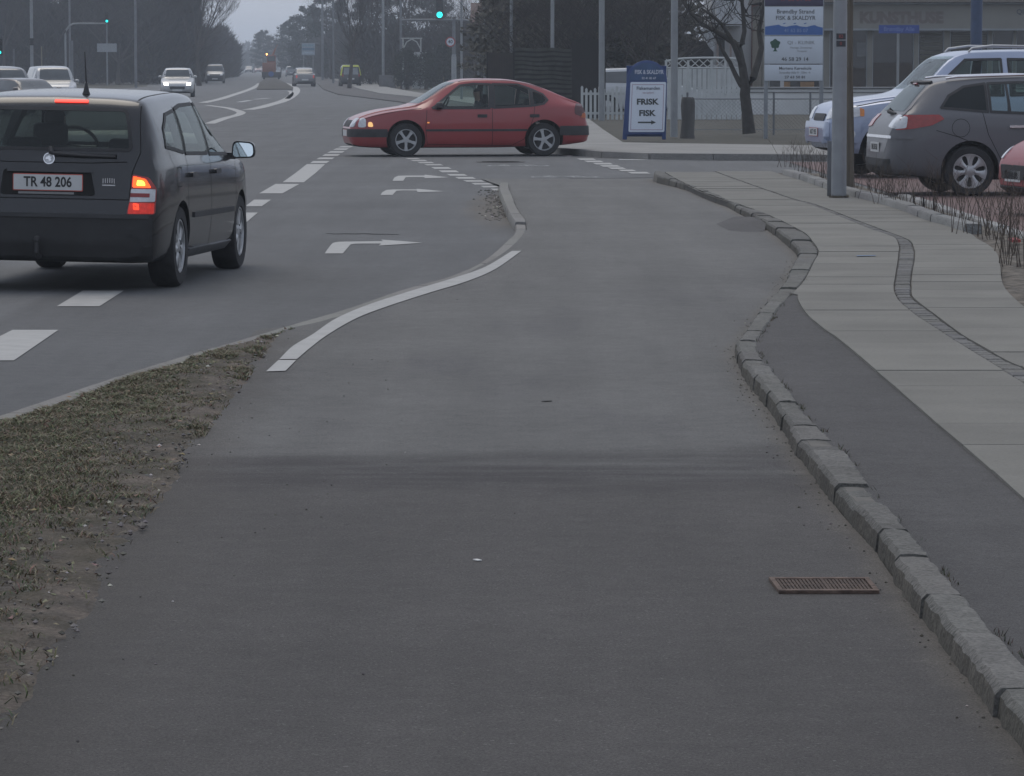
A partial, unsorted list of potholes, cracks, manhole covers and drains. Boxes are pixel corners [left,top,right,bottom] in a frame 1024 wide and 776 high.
drain grate [769,577,879,594]
